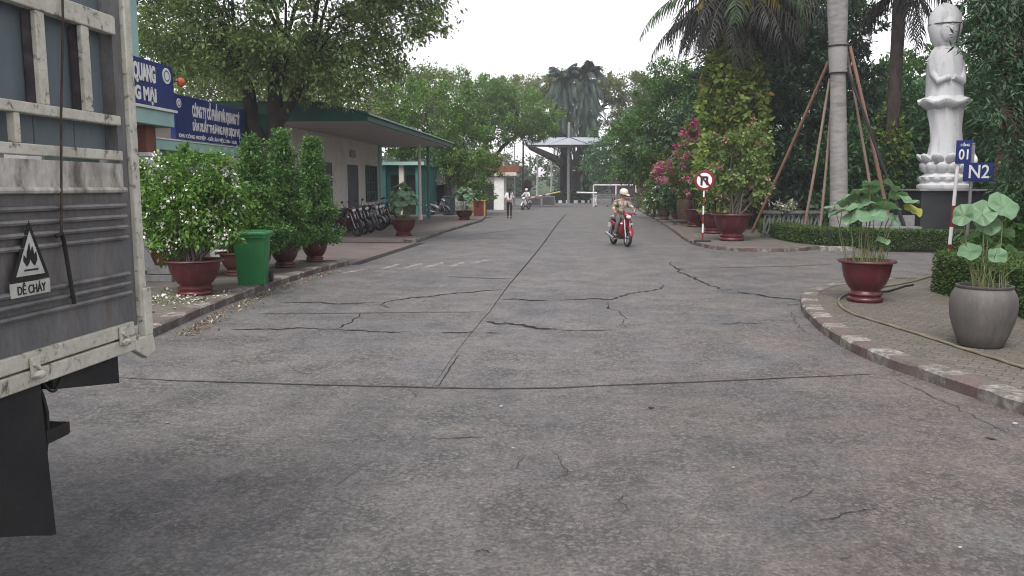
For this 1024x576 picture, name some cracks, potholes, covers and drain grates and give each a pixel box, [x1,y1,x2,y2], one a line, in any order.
crack [299,261,807,334]
